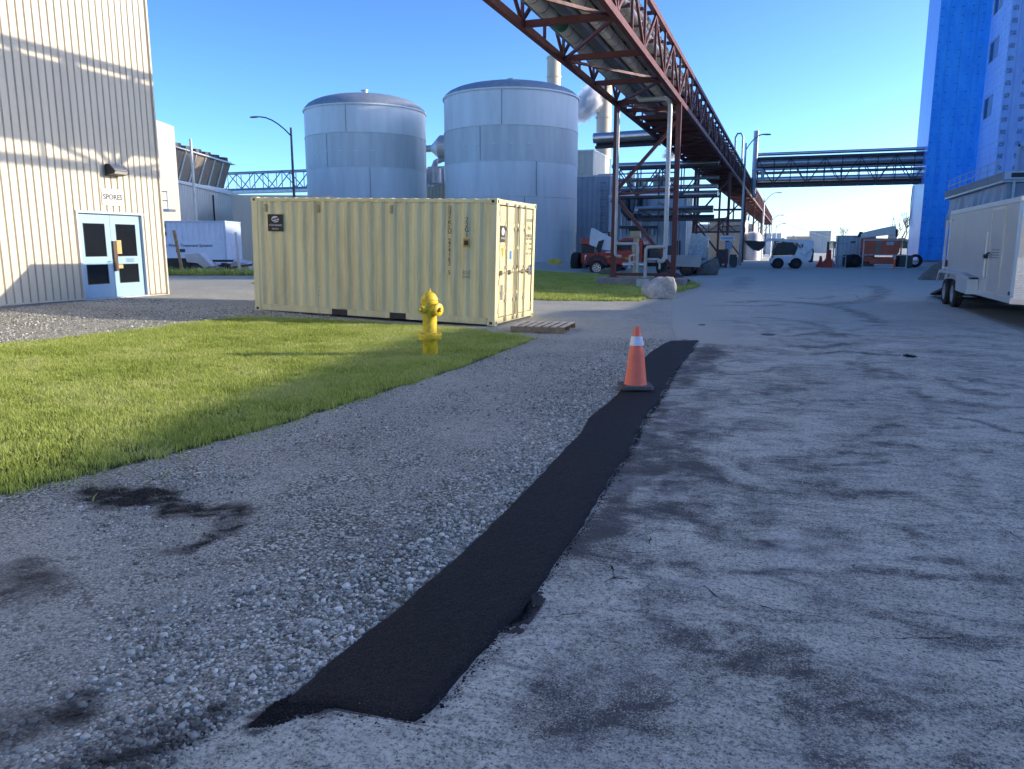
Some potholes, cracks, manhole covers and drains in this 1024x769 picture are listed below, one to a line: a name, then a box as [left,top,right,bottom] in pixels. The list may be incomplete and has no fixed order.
crack [559,531,665,582]
pothole [500,591,546,635]
